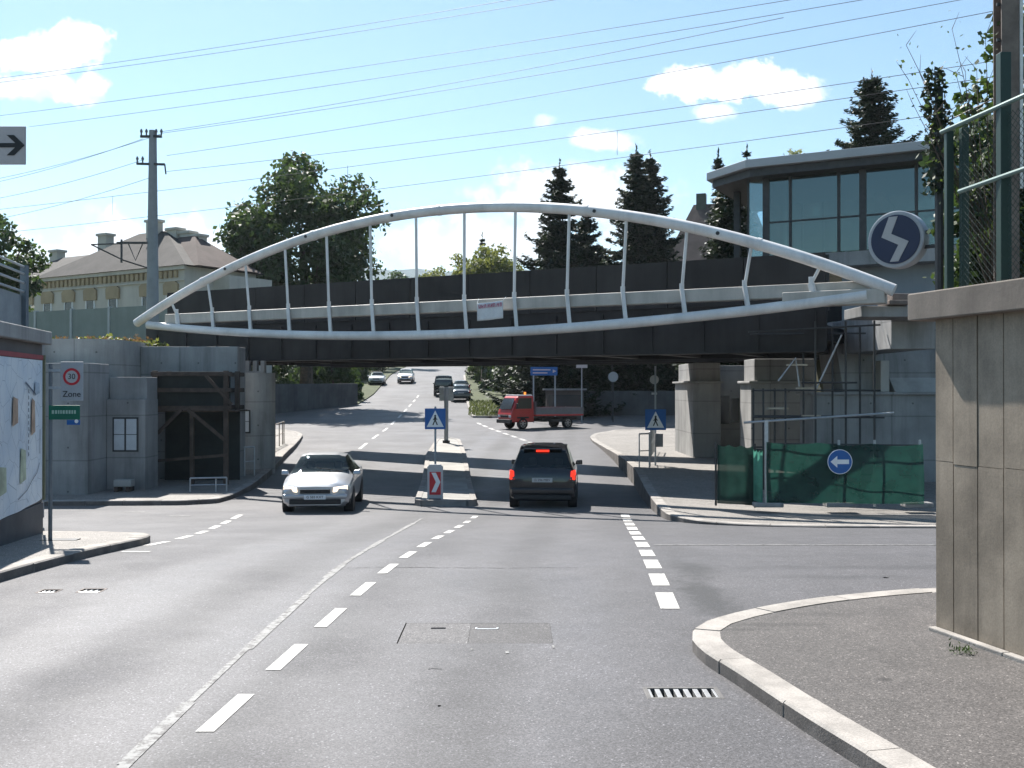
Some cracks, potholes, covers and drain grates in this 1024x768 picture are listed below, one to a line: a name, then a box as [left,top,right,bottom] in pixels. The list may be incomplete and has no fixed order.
manhole cover [398,623,553,643]
drain grate [642,687,725,699]
